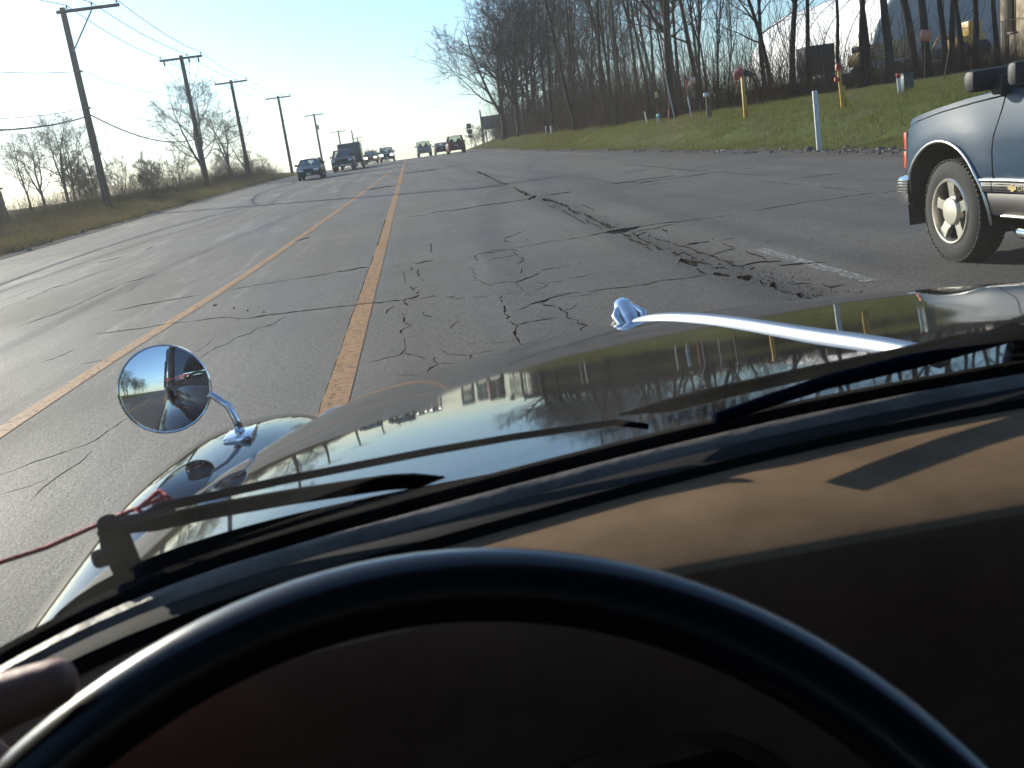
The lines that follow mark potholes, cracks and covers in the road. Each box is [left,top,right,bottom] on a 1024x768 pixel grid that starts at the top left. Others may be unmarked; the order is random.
crack [98,170,892,376]
crack [0,349,126,496]
